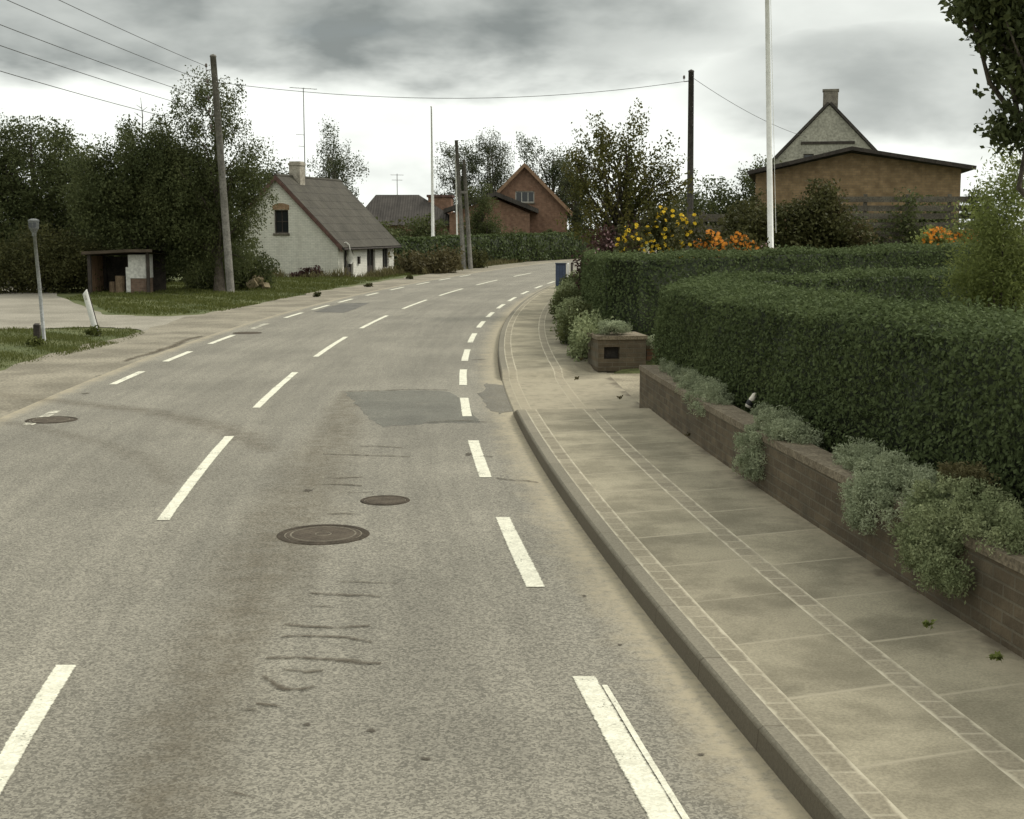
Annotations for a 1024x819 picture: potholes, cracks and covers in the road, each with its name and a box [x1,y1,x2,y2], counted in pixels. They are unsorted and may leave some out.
manhole cover [276,524,370,545]
crack [311,581,381,606]
crack [249,656,381,709]
manhole cover [25,416,78,424]
crack [285,623,372,642]
manhole cover [360,495,410,506]
